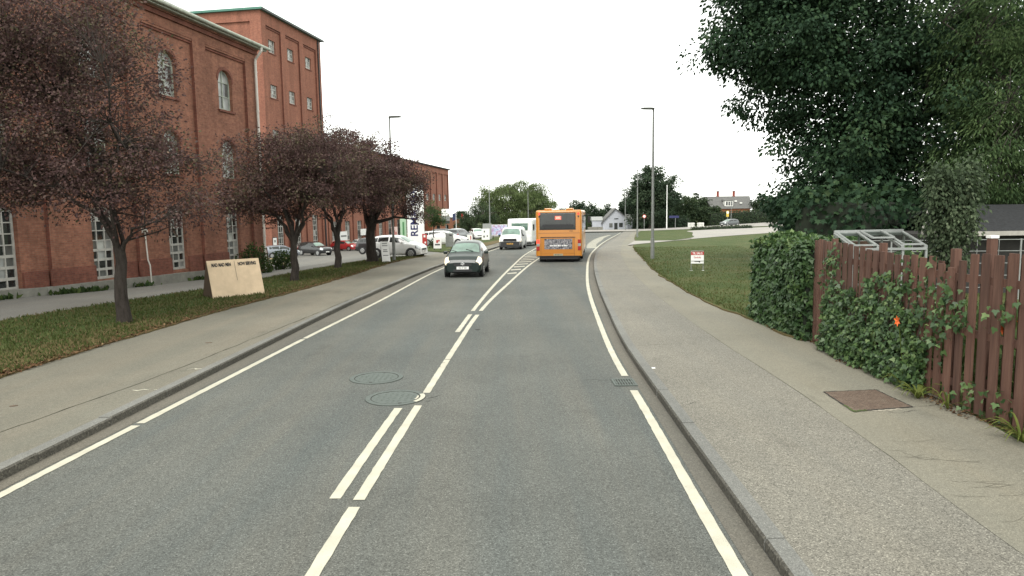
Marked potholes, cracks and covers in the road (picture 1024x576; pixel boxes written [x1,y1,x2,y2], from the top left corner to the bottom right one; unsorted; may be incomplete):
utility cover [823,389,913,412]
crack [890,440,1022,522]
manhole cover [349,371,404,384]
drain grate [611,378,638,386]
manhole cover [365,390,426,406]
